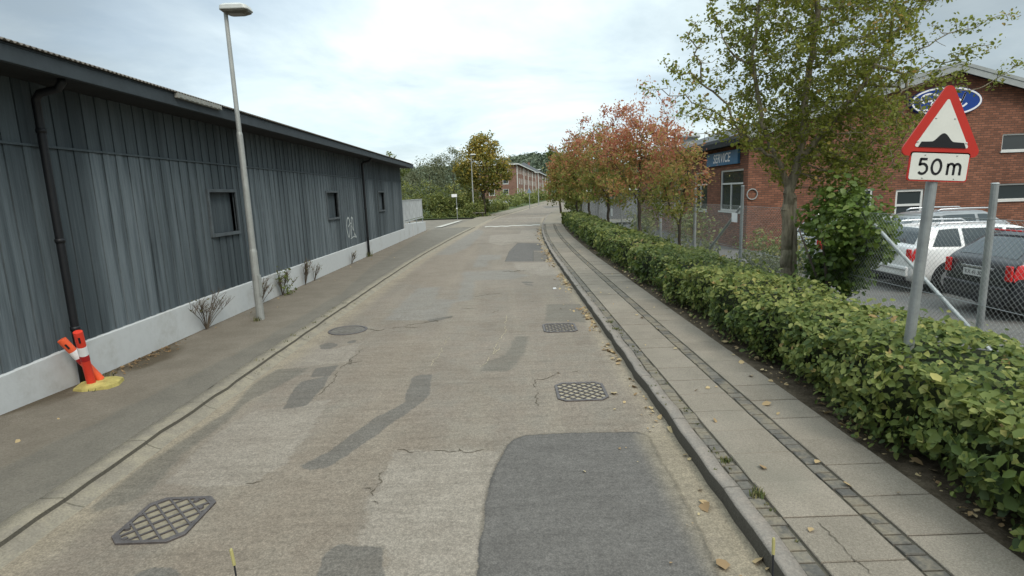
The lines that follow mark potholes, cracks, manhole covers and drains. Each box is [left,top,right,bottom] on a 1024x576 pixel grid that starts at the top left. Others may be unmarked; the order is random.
crack [817,521,869,573]
crack [372,293,507,365]
manhole cover [328,325,368,335]
